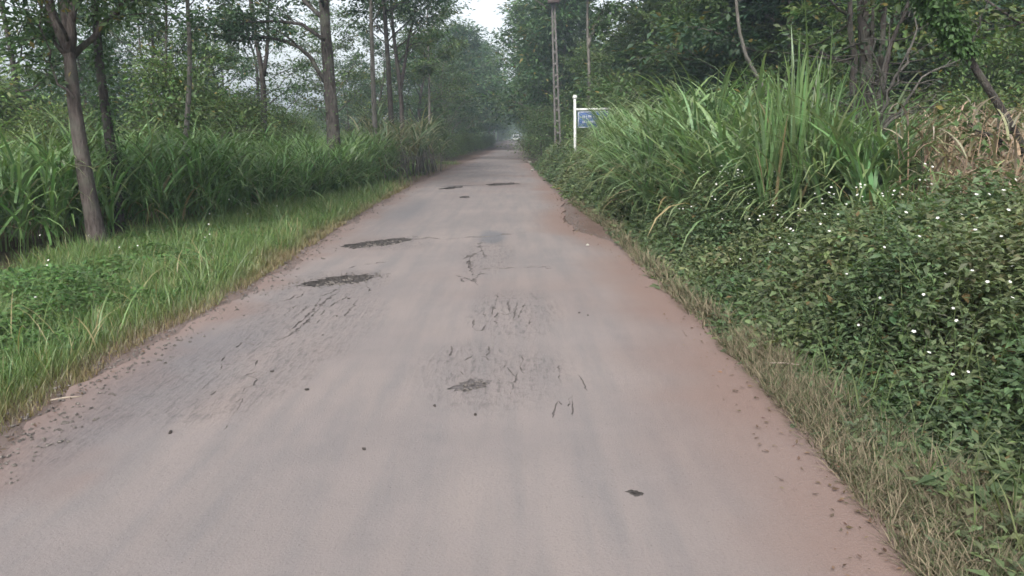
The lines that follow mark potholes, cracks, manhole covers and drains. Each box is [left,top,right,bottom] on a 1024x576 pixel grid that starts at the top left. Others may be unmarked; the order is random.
crack [165,342,274,430]
pothole [444,377,499,394]
crack [397,233,553,285]
pothole [323,236,430,251]
crack [552,365,587,417]
crack [449,295,536,398]
crack [278,287,372,341]
pothole [271,270,391,290]
